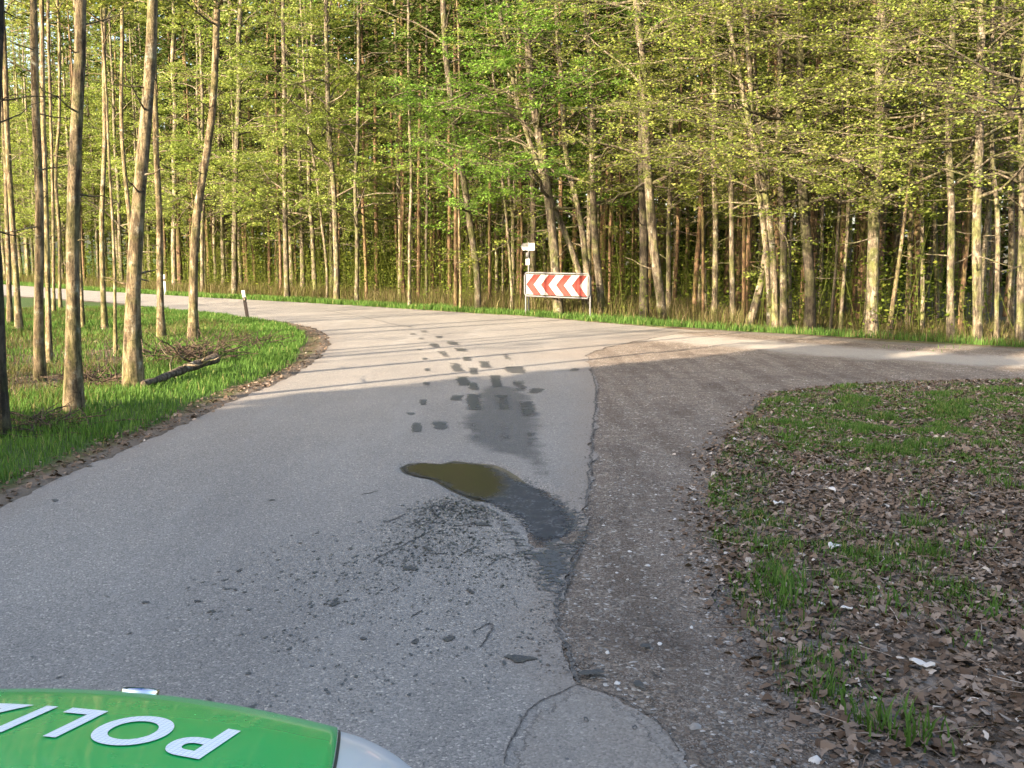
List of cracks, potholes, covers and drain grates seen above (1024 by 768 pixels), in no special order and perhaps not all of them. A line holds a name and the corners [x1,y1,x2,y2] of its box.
crack [551,542,584,684]
crack [584,370,597,506]
crack [476,623,494,646]
pothole [400,461,526,501]
